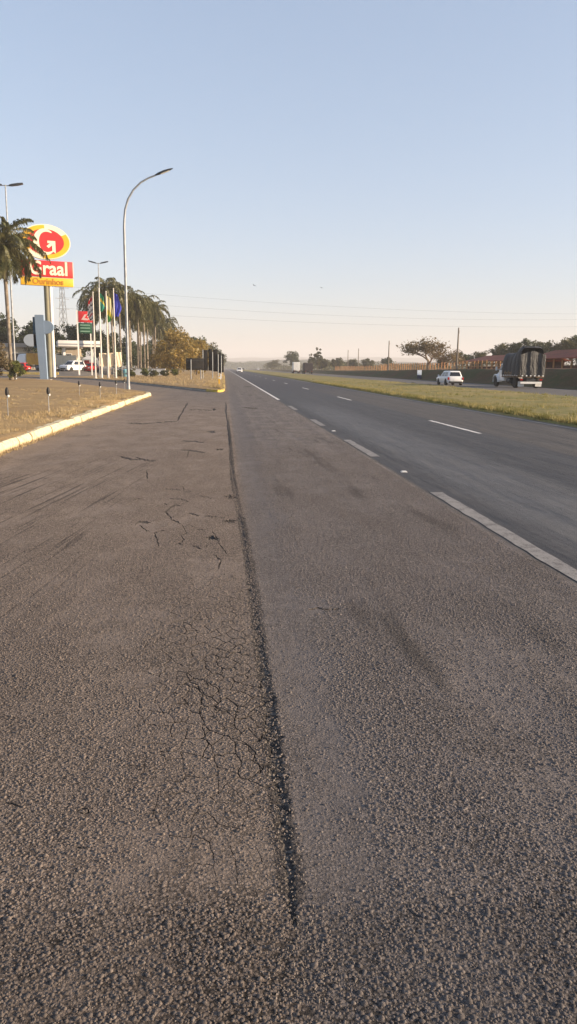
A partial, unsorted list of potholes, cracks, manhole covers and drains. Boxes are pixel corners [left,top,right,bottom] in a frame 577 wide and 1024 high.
crack [120,403,339,928]
